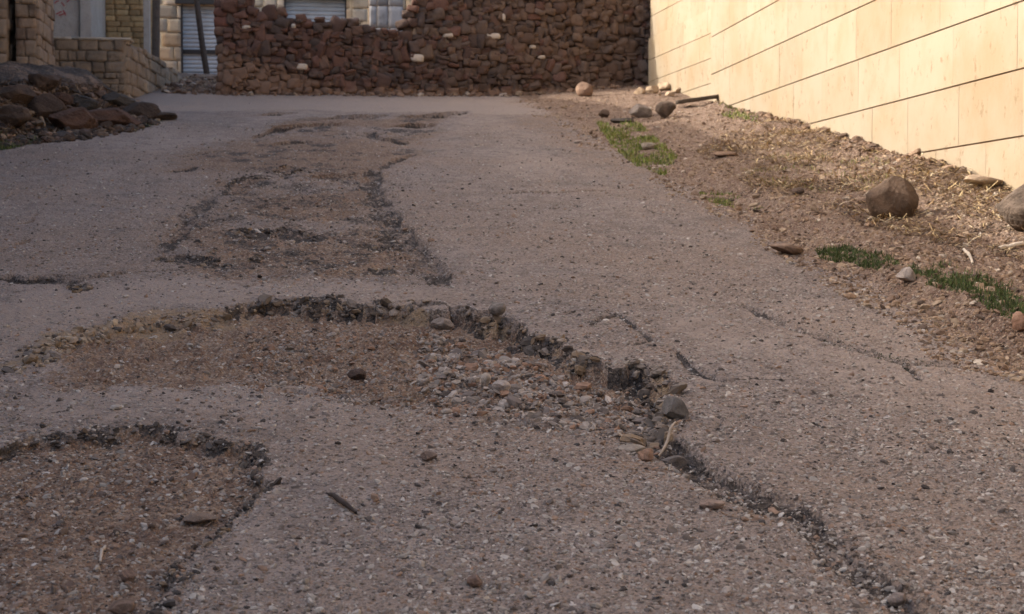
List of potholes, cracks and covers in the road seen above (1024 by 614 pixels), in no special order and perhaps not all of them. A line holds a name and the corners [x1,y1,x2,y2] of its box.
pothole [0,294,687,452]
pothole [368,267,398,276]
crack [0,195,219,285]
pothole [267,164,303,181]
pothole [247,254,264,263]
pothole [219,174,272,197]
pothole [228,226,323,244]
pothole [0,422,282,614]
crack [562,304,964,614]
